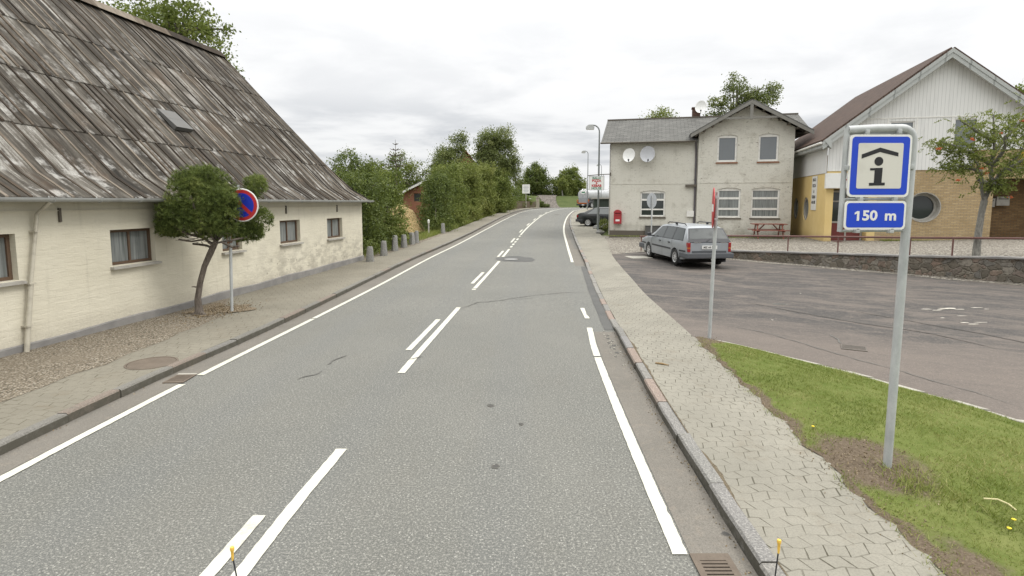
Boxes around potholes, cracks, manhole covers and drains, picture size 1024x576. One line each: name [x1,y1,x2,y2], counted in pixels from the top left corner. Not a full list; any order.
drain grate [162,373,198,383]
manhole cover [123,356,179,370]
drain grate [689,553,742,576]
